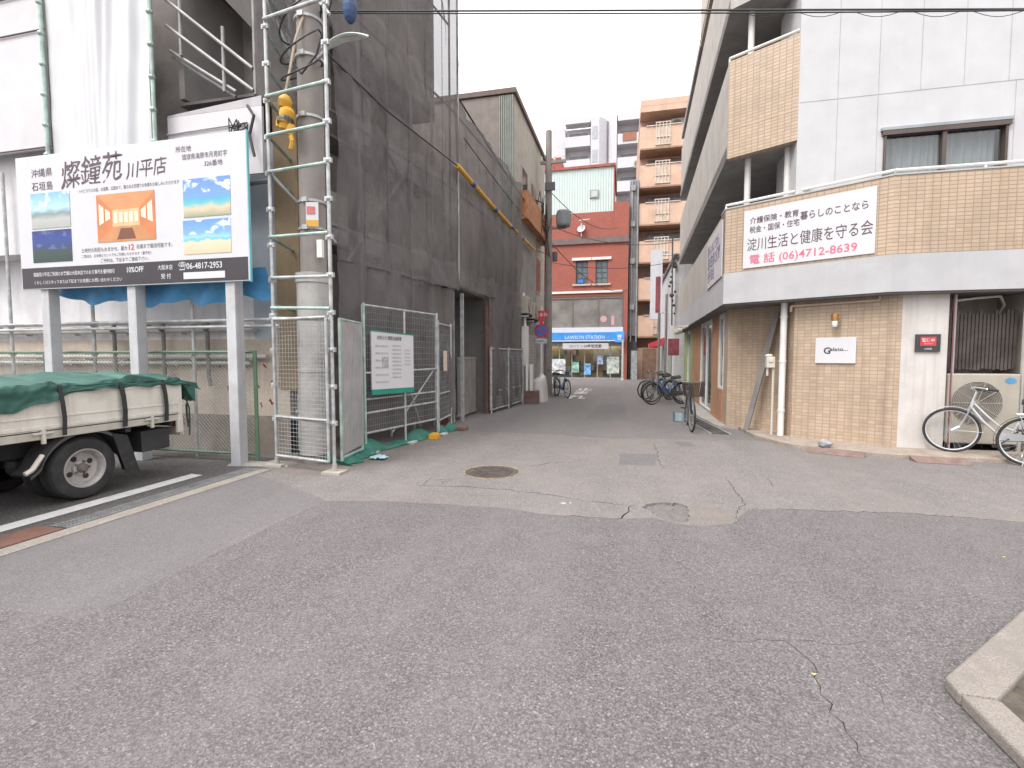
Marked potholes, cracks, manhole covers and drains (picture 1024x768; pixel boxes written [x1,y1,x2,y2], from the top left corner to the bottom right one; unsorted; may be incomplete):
crack [418,477,578,500]
manhole cover [463,465,520,479]
crack [544,501,634,519]
crack [708,637,890,766]
pothole [642,502,690,523]
